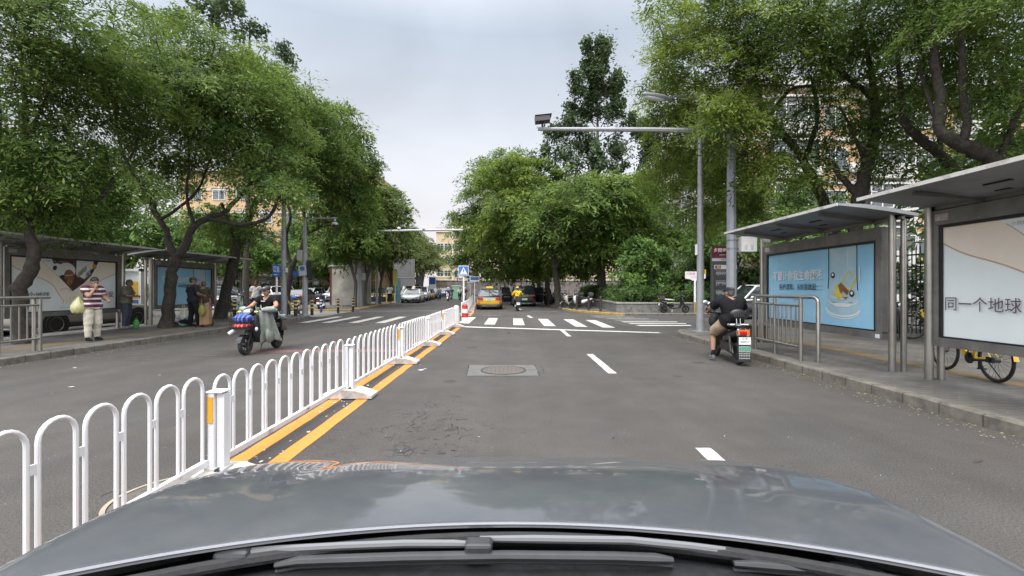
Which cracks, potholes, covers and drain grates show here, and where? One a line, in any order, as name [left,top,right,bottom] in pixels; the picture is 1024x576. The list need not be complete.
crack [387,396,486,453]
manhole cover [481,366,526,374]
